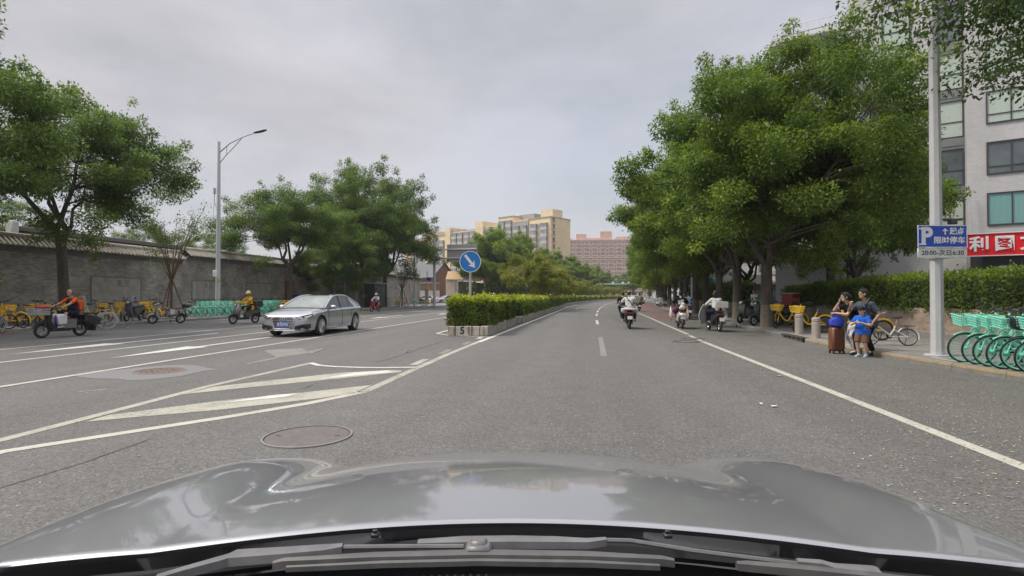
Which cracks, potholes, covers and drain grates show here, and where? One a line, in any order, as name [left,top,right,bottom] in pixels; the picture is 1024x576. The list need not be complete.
crack [1,439,149,488]
manhole cover [260,425,353,449]
